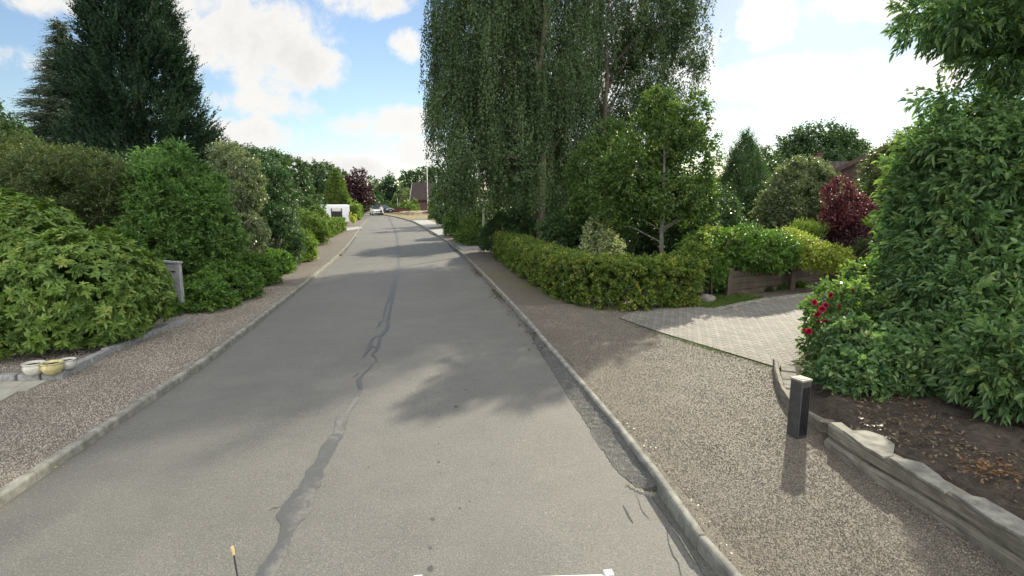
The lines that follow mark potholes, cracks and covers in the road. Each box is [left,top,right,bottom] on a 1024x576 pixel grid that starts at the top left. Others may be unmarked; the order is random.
crack [622,491,704,576]
